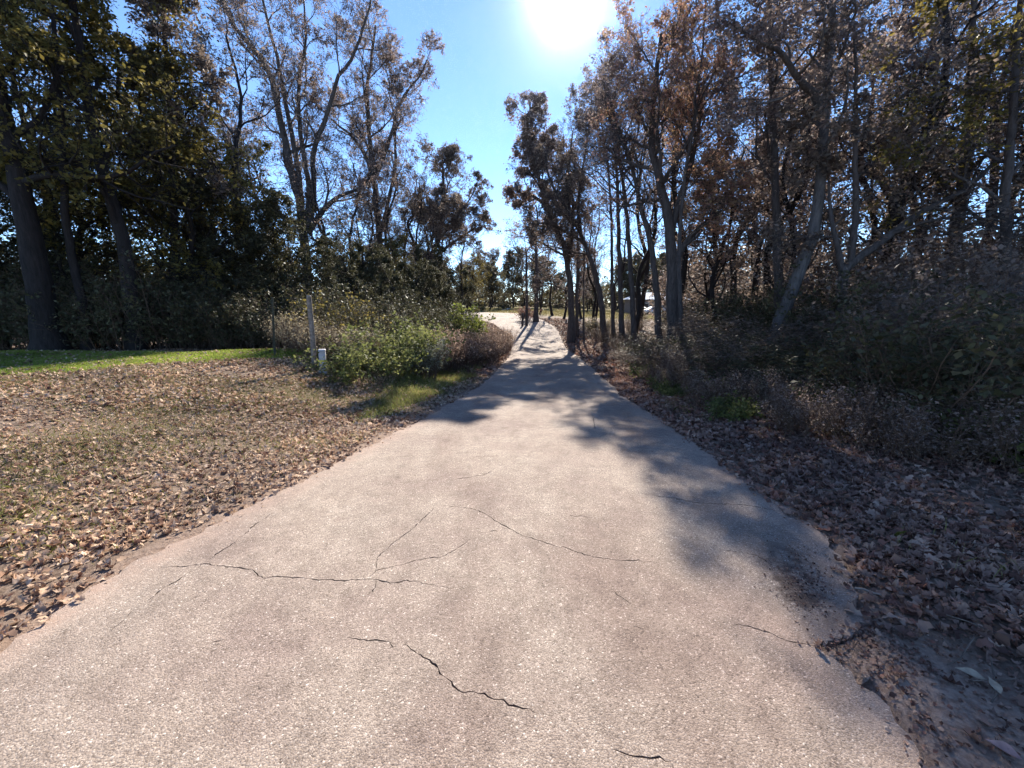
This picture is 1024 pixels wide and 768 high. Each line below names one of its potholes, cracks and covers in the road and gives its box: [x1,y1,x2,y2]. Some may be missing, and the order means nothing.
crack [127,514,435,617]
crack [618,751,663,760]
crack [357,639,523,709]
